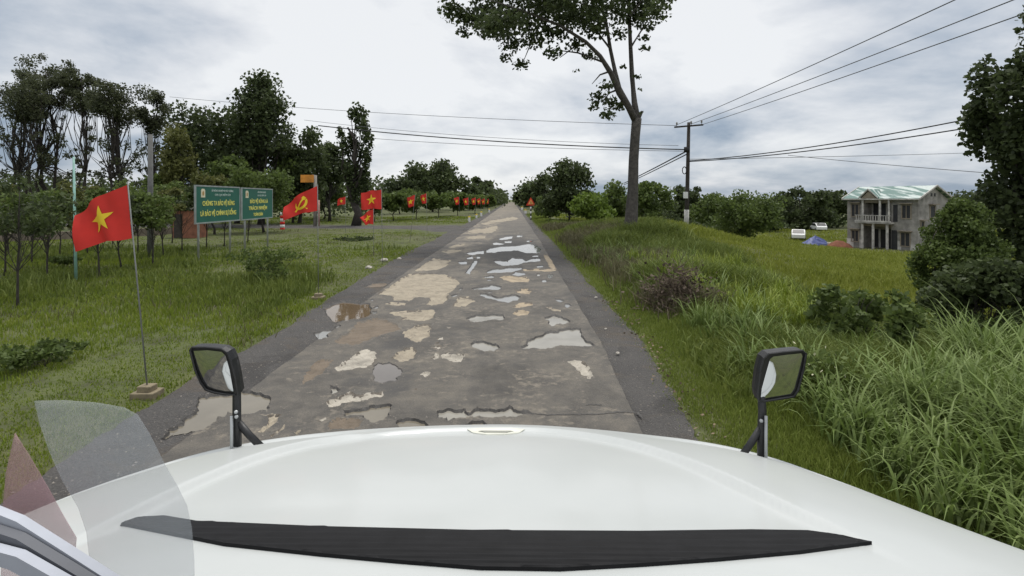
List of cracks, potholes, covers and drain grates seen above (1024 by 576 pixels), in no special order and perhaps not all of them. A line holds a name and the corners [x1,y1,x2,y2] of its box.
pothole [544,314,570,326]
pothole [396,417,428,427]
pothole [470,340,500,351]
pothole [372,361,403,383]
crack [532,404,642,417]
pothole [437,405,532,421]
pothole [466,314,505,322]
pothole [161,390,271,439]
pothole [343,403,392,423]
pothole [521,327,596,349]
pothole [323,301,372,323]
